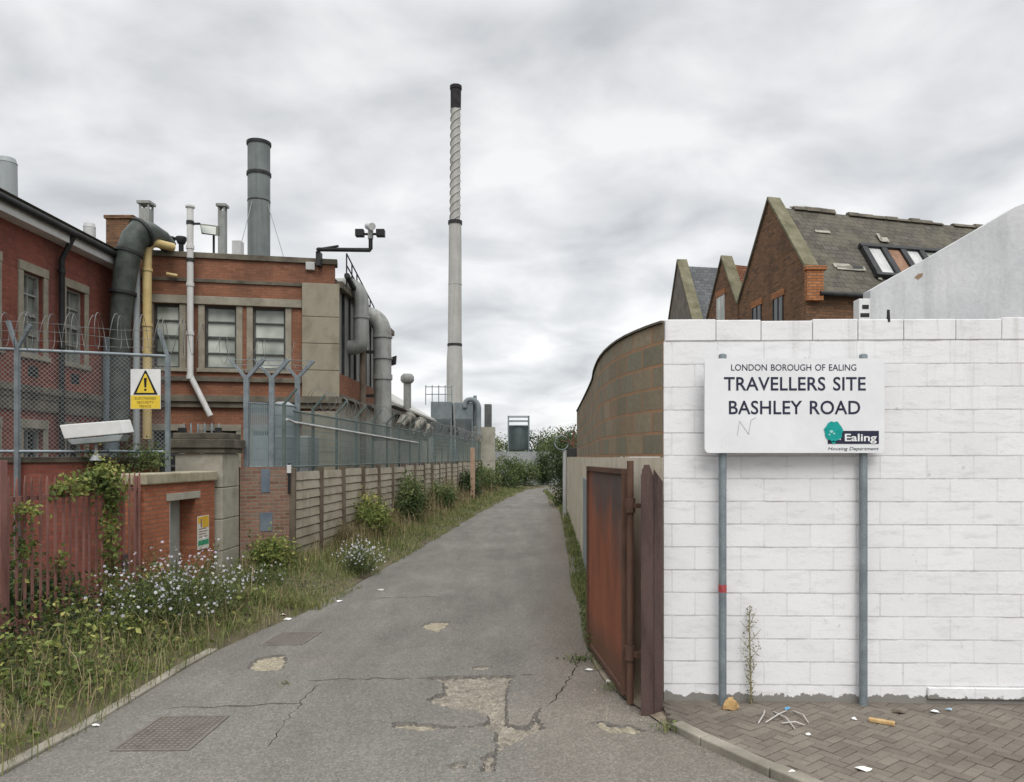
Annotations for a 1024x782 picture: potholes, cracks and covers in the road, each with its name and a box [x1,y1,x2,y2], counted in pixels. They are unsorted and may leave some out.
manhole cover [109,715,230,751]
pothole [417,675,546,772]
manhole cover [259,632,321,645]
crack [548,653,587,705]
pothole [391,721,457,731]
